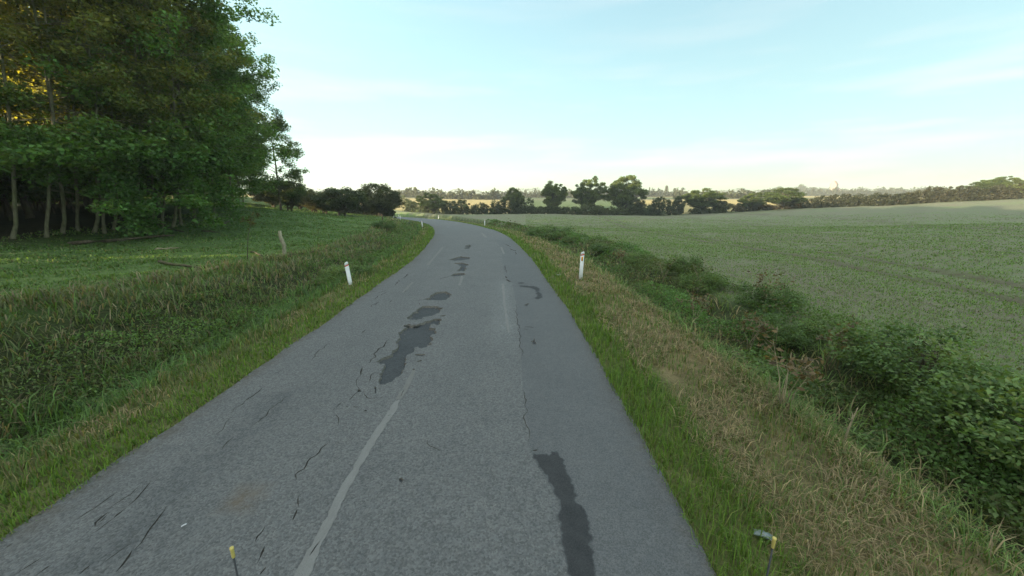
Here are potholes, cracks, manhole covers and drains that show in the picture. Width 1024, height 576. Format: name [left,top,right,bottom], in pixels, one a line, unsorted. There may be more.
crack [218,366,290,449]
crack [78,481,167,574]
crack [292,440,332,521]
crack [333,273,420,423]
